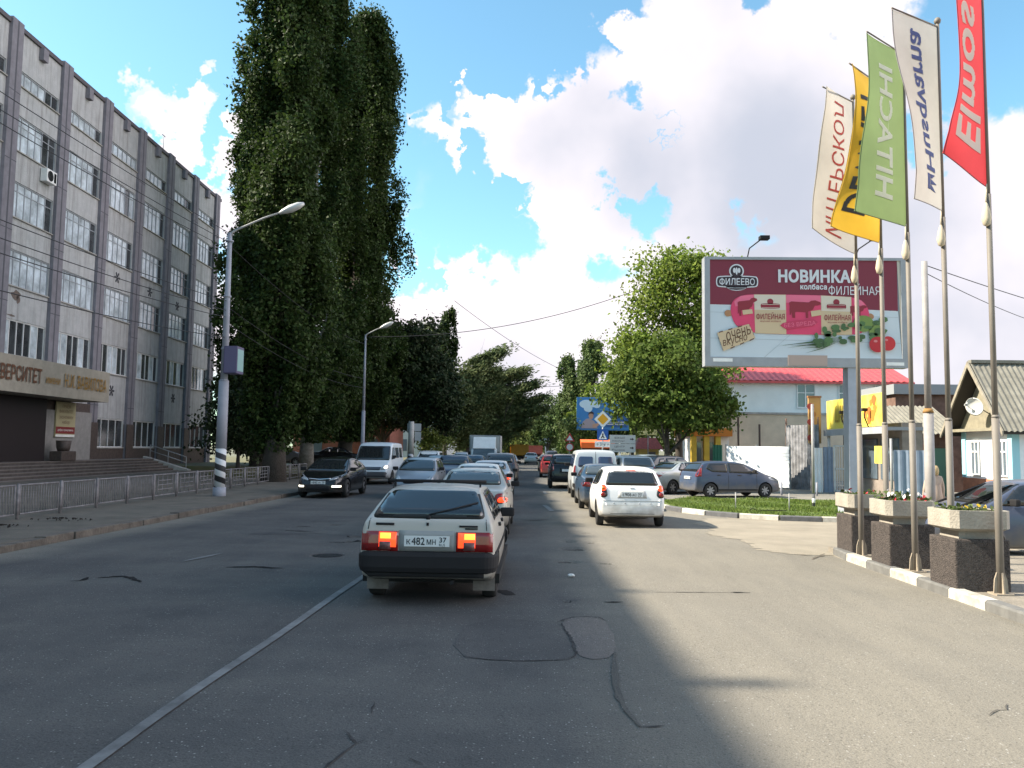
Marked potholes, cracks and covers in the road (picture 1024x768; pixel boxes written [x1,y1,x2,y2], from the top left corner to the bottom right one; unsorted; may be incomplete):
crack [324,702,375,768]
